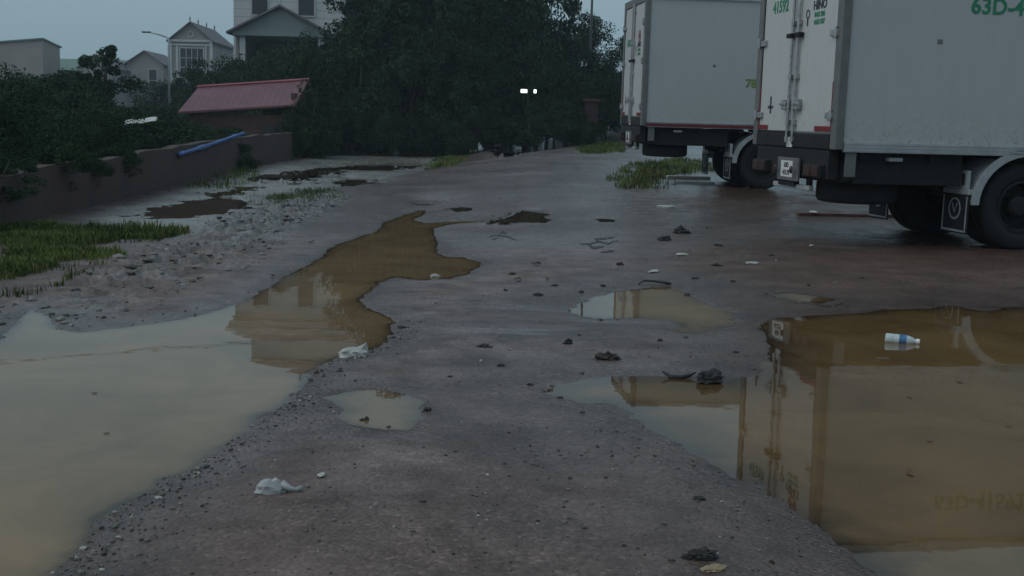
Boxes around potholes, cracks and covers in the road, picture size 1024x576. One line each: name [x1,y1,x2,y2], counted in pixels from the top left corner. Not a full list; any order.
pothole [117,192,267,219]
pothole [547,282,753,336]
crack [579,237,618,253]
pothole [756,291,848,306]
pothole [518,302,1024,576]
pothole [481,208,555,225]
pothole [0,208,490,576]
